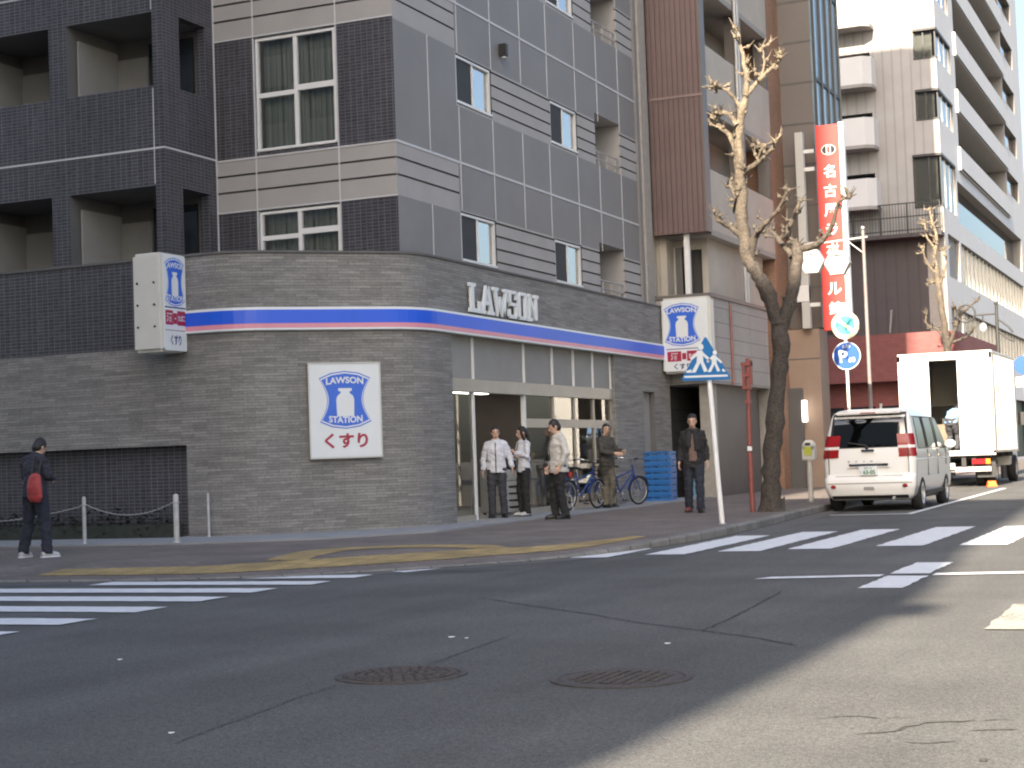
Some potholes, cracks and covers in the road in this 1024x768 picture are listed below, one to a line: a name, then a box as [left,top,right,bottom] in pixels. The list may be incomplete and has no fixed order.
manhole cover [550,668,693,689]
crack [484,591,794,645]
crack [176,684,336,743]
manhole cover [335,665,468,685]
